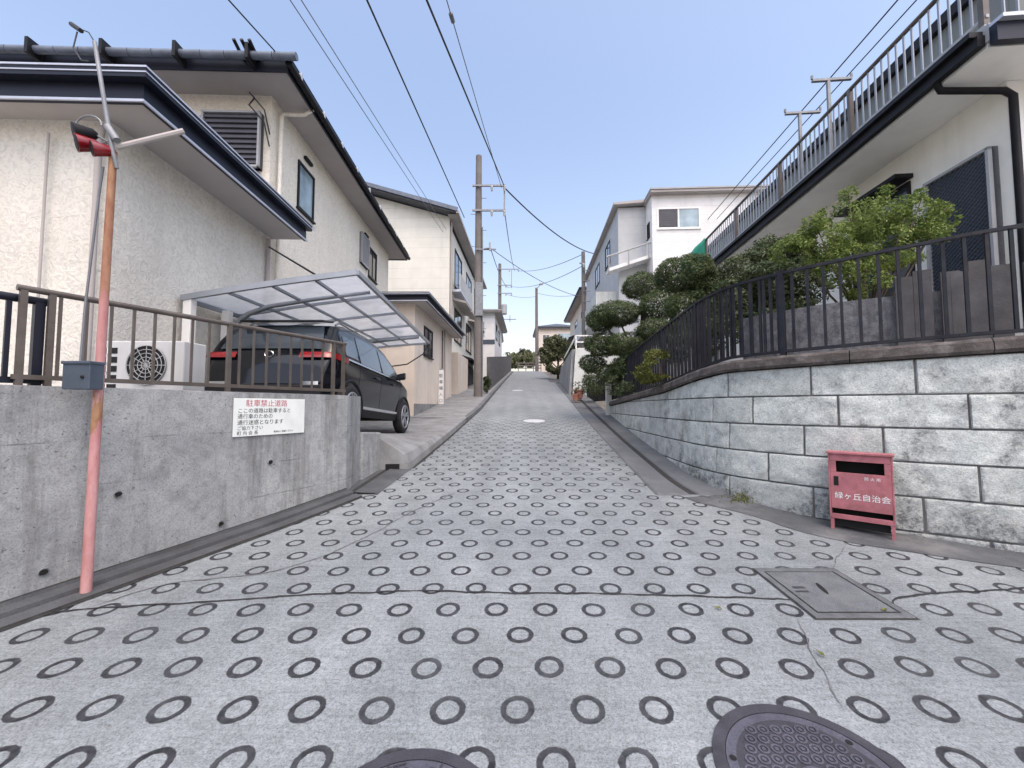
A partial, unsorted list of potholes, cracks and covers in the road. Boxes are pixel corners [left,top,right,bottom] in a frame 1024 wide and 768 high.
manhole cover [712,704,904,768]
crack [797,618,845,712]
manhole cover [751,568,921,620]
manhole cover [358,748,479,768]
crack [53,492,1024,613]
